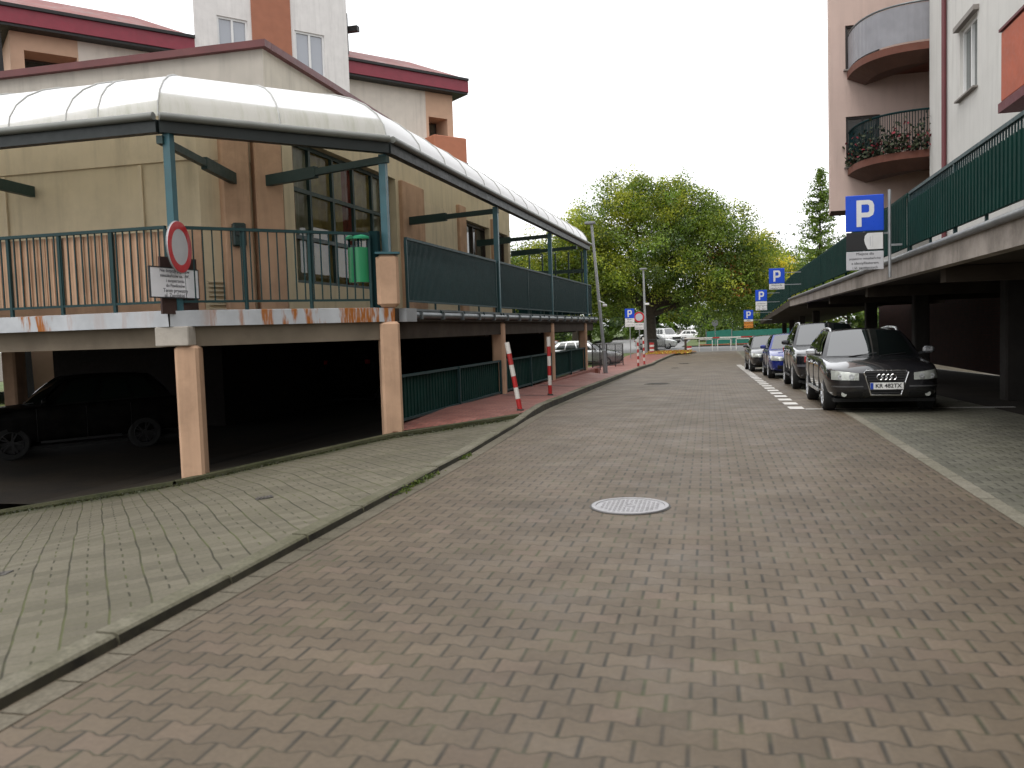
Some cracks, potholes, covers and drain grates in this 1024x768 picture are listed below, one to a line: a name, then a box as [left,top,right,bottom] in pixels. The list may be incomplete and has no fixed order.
manhole cover [589,497,671,515]
